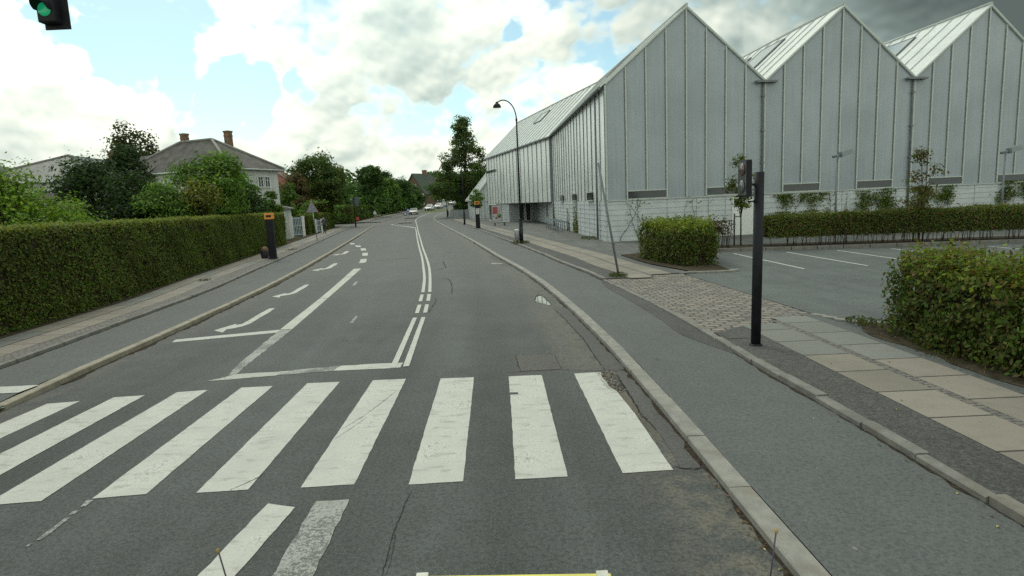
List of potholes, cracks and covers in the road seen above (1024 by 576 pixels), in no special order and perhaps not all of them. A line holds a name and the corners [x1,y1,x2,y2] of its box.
pothole [598,370,626,392]
pothole [534,294,552,305]
crack [382,490,412,576]
crack [614,370,656,430]
